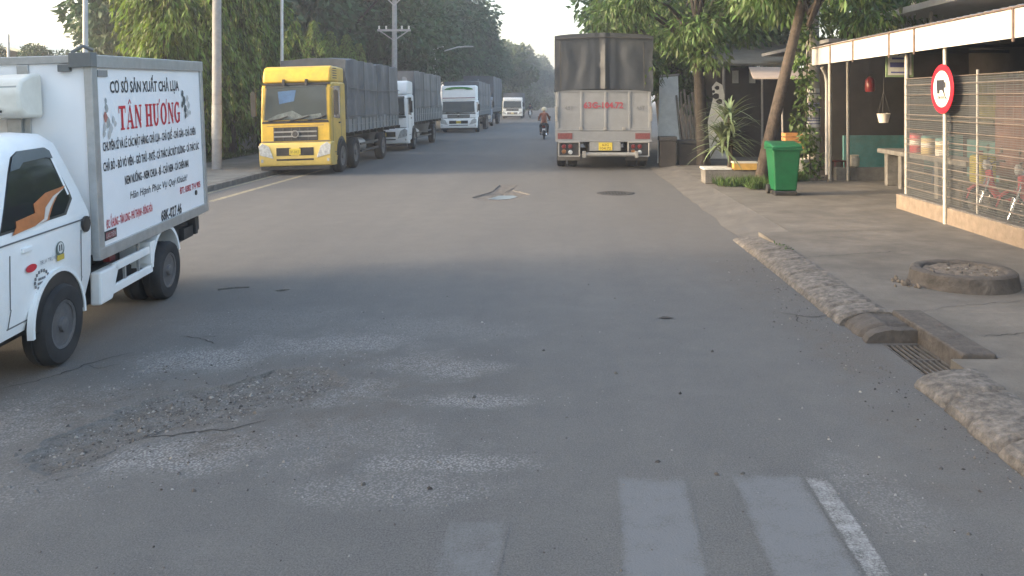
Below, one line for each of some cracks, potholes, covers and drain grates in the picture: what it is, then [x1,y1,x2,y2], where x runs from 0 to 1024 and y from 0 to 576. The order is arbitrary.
crack [5,353,128,388]
crack [141,420,265,439]
drain grate [884,310,996,375]
pothole [0,362,361,484]
pothole [465,184,535,202]
